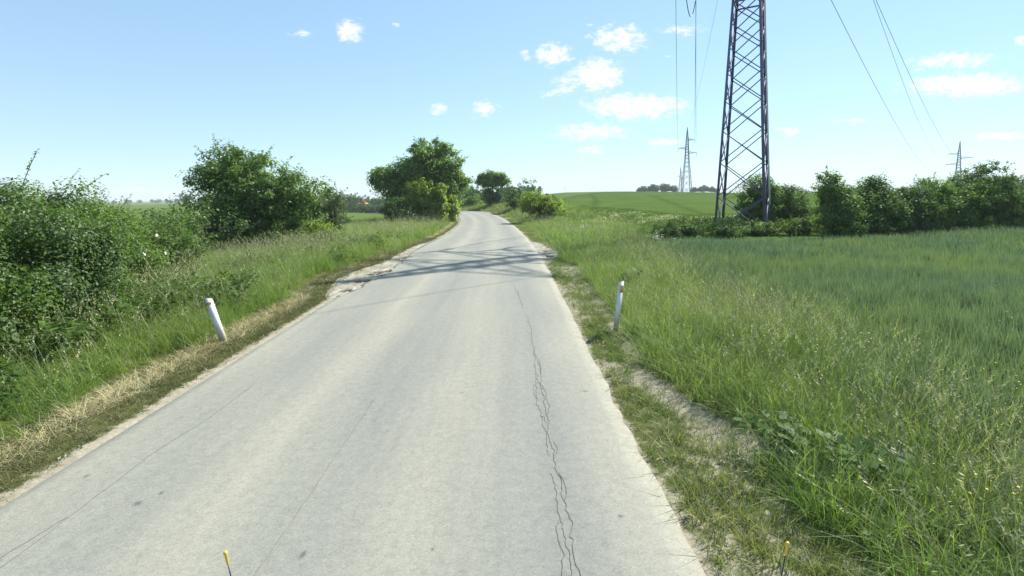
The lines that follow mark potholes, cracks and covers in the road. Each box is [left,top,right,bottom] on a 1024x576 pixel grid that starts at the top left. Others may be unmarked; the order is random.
crack [253,401,373,576]
crack [0,385,253,568]
crack [532,341,581,576]
